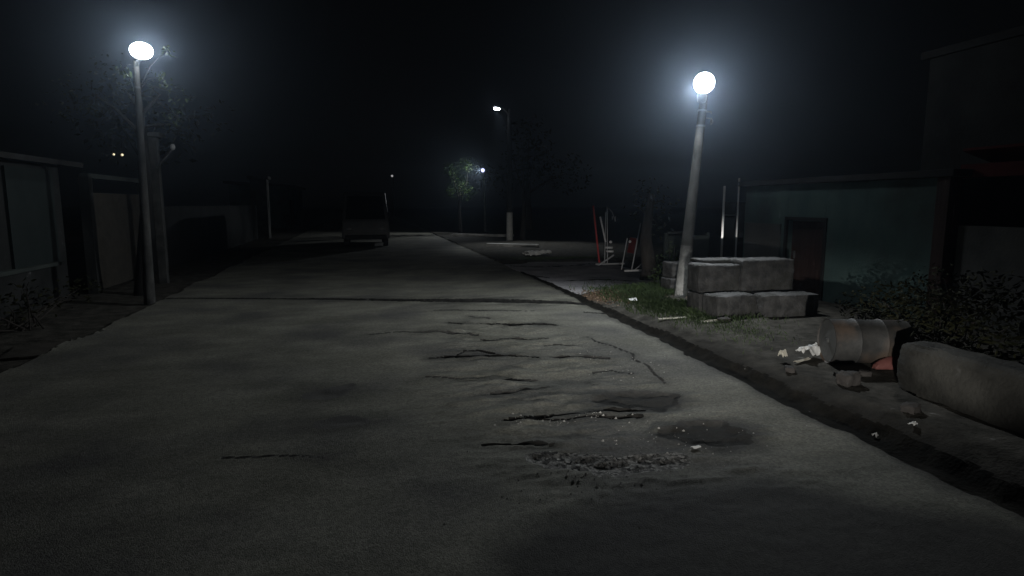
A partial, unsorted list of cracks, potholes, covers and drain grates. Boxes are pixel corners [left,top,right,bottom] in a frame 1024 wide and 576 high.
crack [166,298,666,384]
pothole [590,390,681,412]
pothole [524,451,691,478]
crack [425,376,551,395]
pothole [656,419,754,447]
crack [501,407,646,422]
